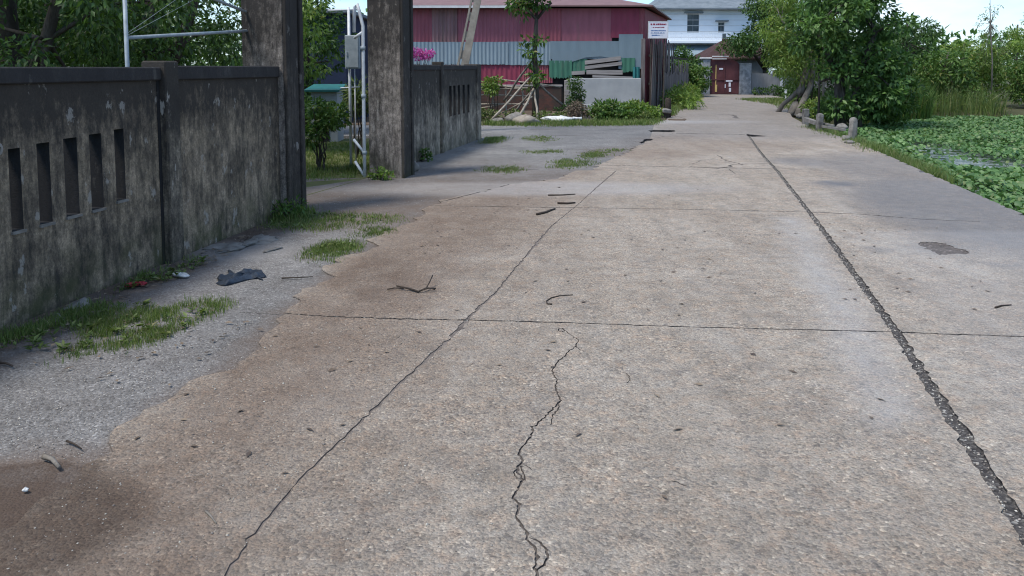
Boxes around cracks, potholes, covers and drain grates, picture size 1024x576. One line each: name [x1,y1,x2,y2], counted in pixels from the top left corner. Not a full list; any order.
crack [511,328,580,576]
